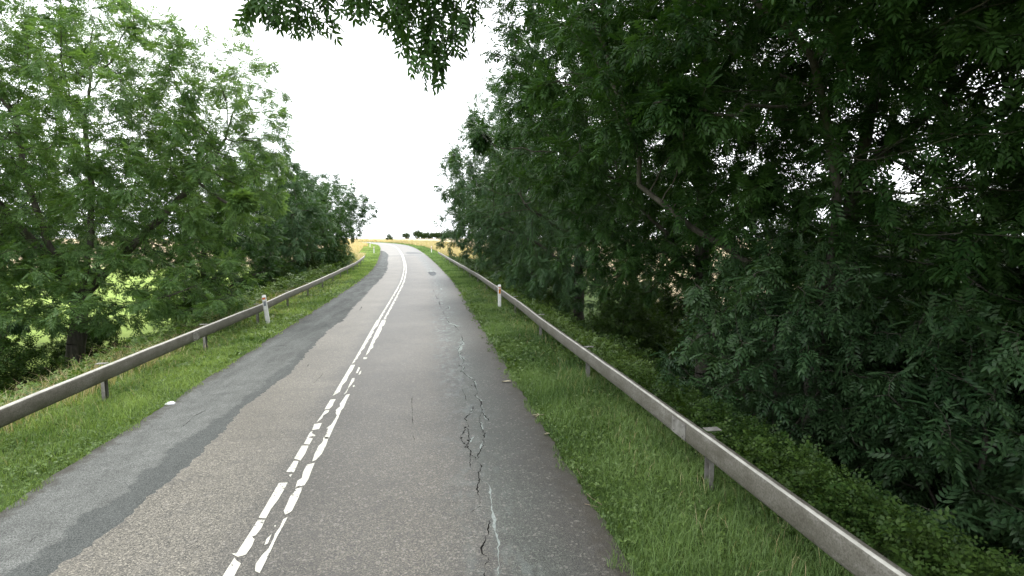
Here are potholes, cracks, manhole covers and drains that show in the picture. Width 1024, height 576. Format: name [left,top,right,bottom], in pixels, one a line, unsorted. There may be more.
crack [433,288,500,576]
